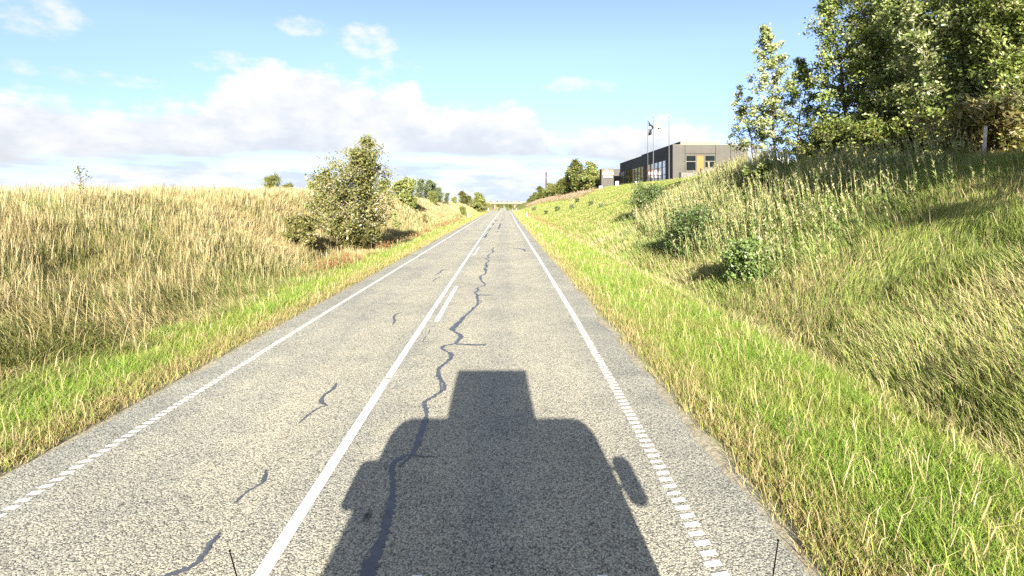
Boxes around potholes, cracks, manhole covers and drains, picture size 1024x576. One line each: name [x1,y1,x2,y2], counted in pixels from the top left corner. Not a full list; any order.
crack [234,470,268,503]
crack [298,383,337,424]
crack [164,533,221,576]
